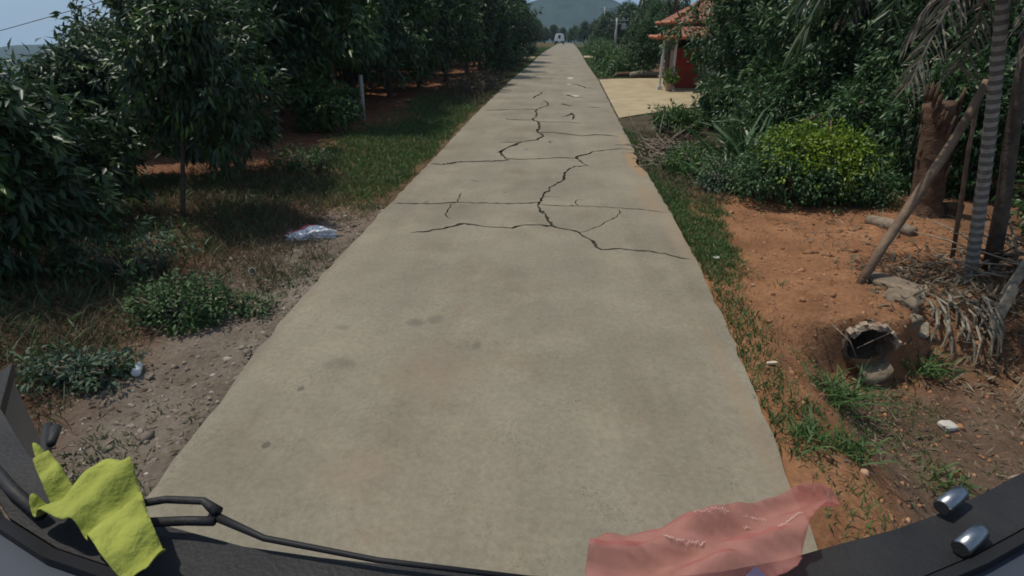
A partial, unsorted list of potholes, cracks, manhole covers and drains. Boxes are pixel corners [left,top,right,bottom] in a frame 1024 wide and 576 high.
crack [398,84,687,259]
